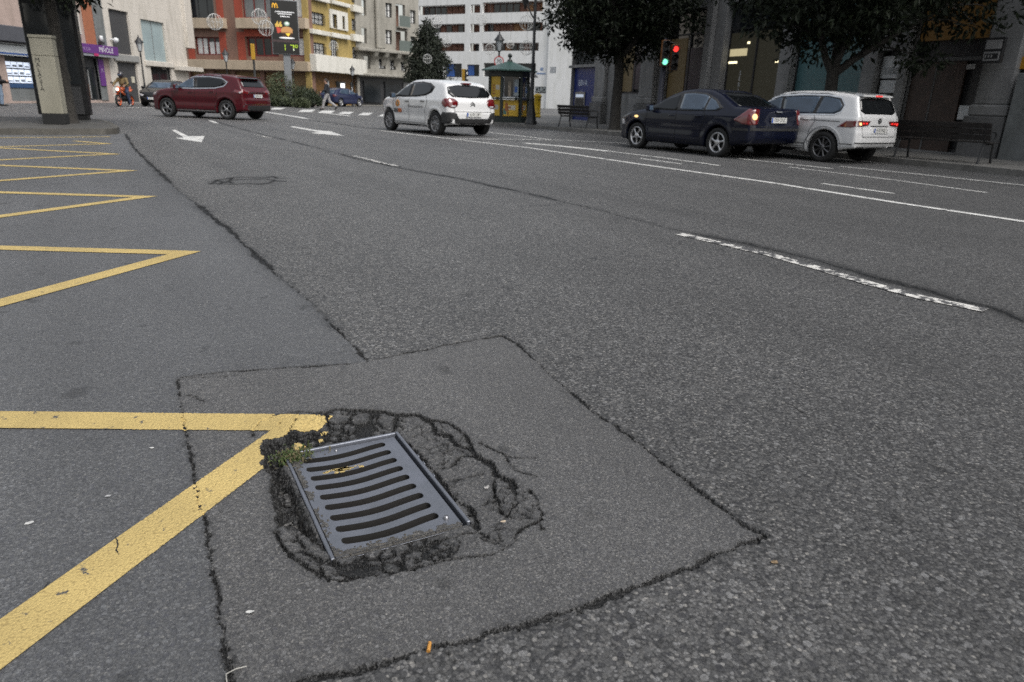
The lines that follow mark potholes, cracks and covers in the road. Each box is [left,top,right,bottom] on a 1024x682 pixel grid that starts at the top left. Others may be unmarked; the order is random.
crack [176,335,768,682]
drain grate [284,432,471,562]
